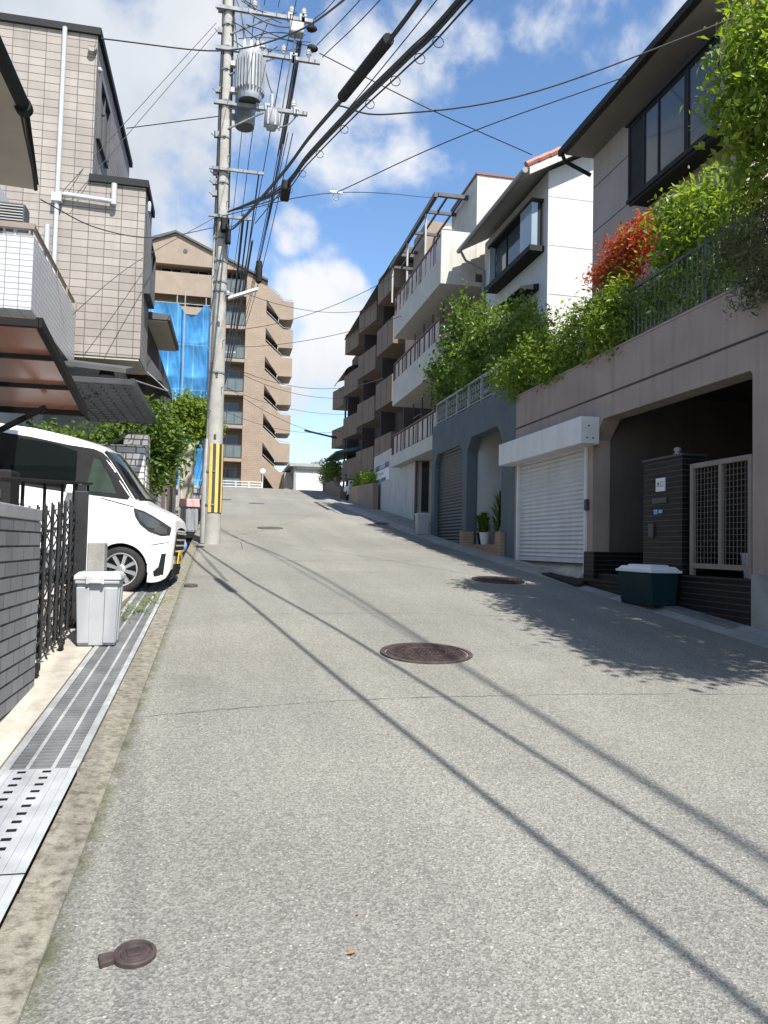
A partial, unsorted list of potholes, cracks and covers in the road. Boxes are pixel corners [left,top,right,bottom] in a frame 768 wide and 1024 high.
drain grate [79,638,143,668]
drain grate [1,706,109,778]
drain grate [49,666,129,710]
manhole cover [380,642,473,664]
drain grate [119,617,153,639]
manhole cover [98,939,157,969]
manhole cover [471,576,525,584]
